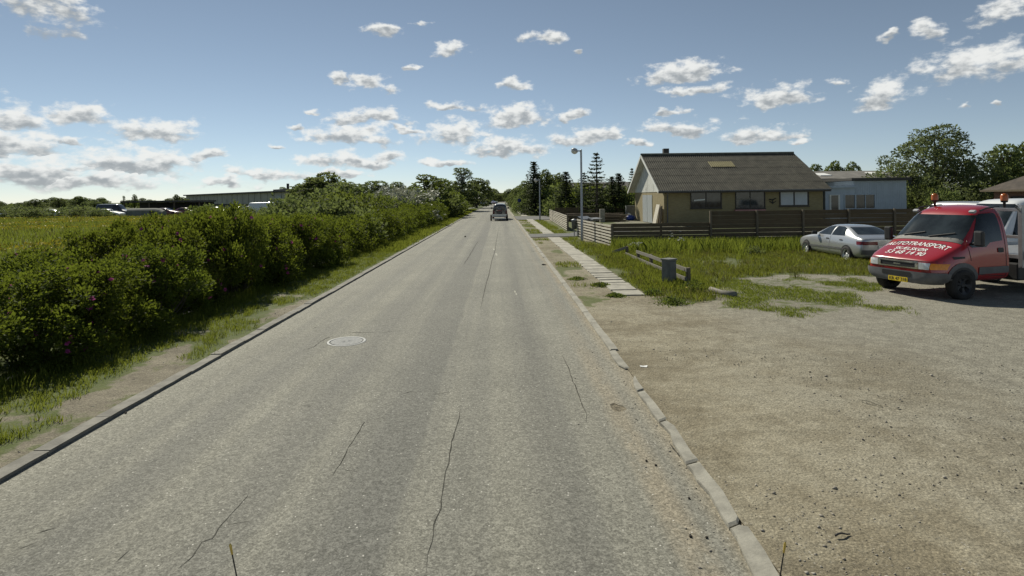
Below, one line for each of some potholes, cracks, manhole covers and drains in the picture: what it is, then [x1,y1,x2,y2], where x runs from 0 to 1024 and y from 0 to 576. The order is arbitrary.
crack [180,495,248,567]
crack [464,234,498,305]
crack [403,391,461,568]
manhole cover [327,336,366,346]
